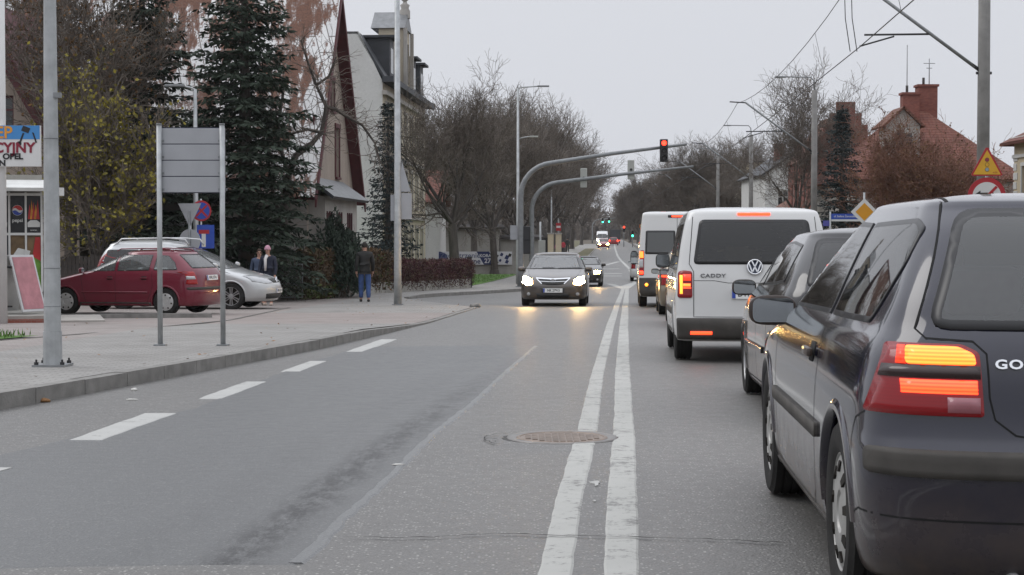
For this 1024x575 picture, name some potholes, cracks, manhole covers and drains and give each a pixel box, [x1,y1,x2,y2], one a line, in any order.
manhole cover [502,430,619,444]
